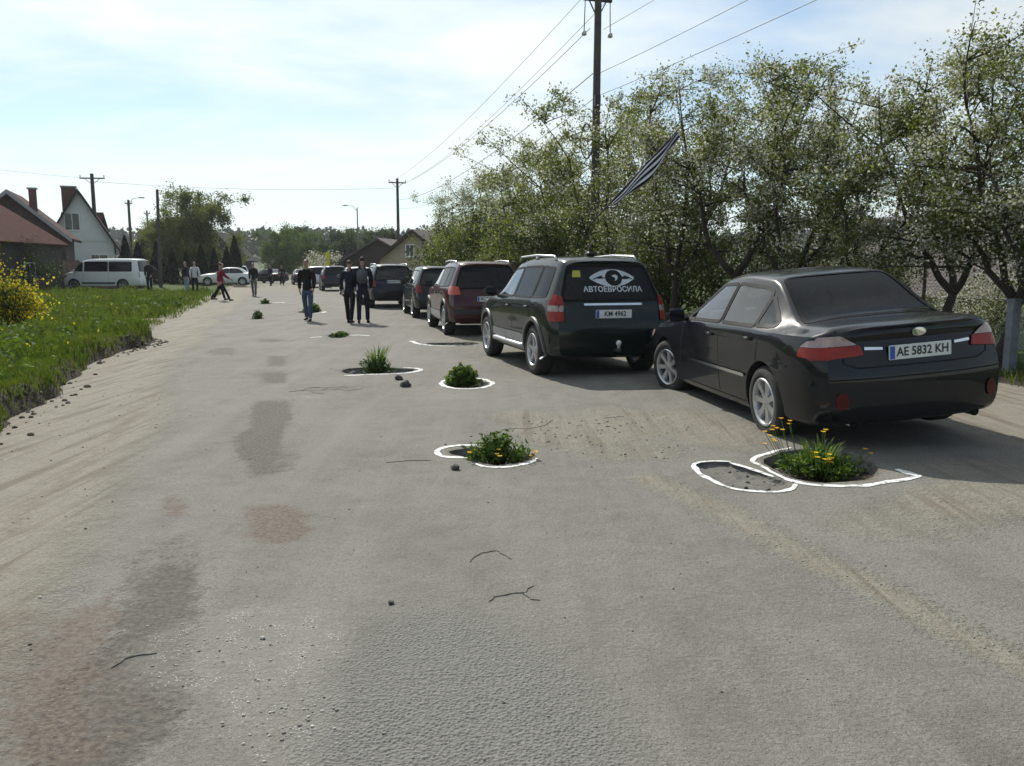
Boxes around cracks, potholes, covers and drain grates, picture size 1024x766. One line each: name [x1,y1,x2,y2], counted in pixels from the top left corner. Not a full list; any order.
crack [111,652,157,668]
pothole [449,448,533,465]
pothole [696,462,786,491]
pothole [764,449,879,483]
crack [489,585,540,601]
